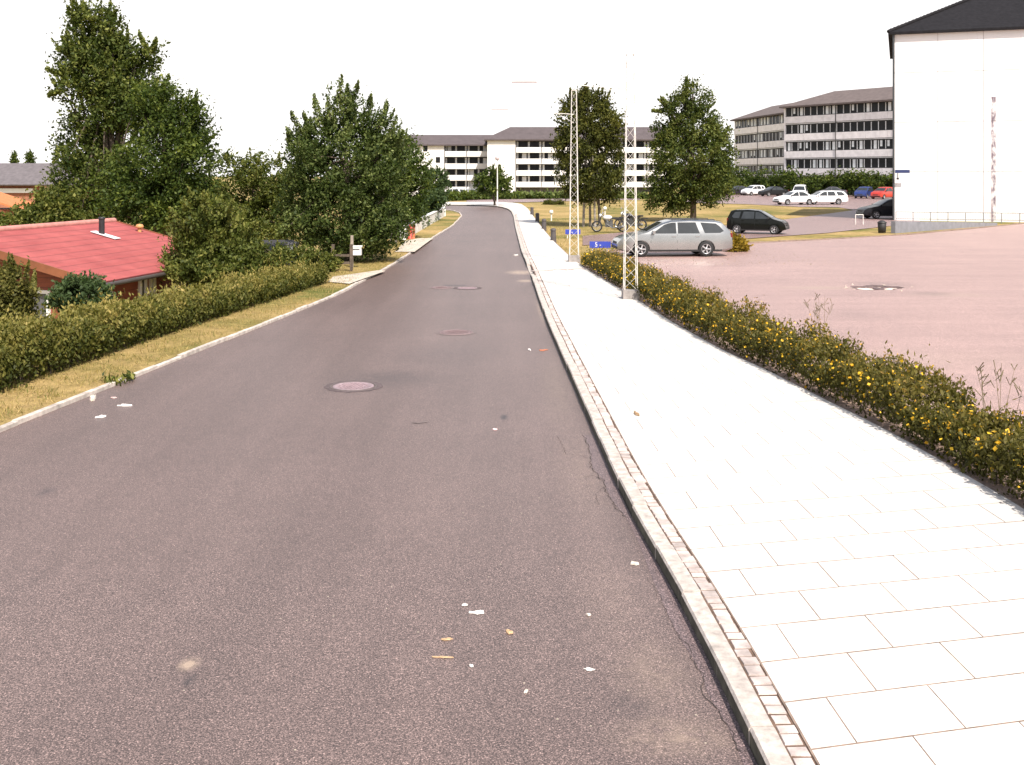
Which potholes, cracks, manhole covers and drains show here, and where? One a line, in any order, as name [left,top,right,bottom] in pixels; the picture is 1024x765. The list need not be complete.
crack [557,436,629,519]
crack [652,584,741,752]
manhole cover [324,380,383,392]
